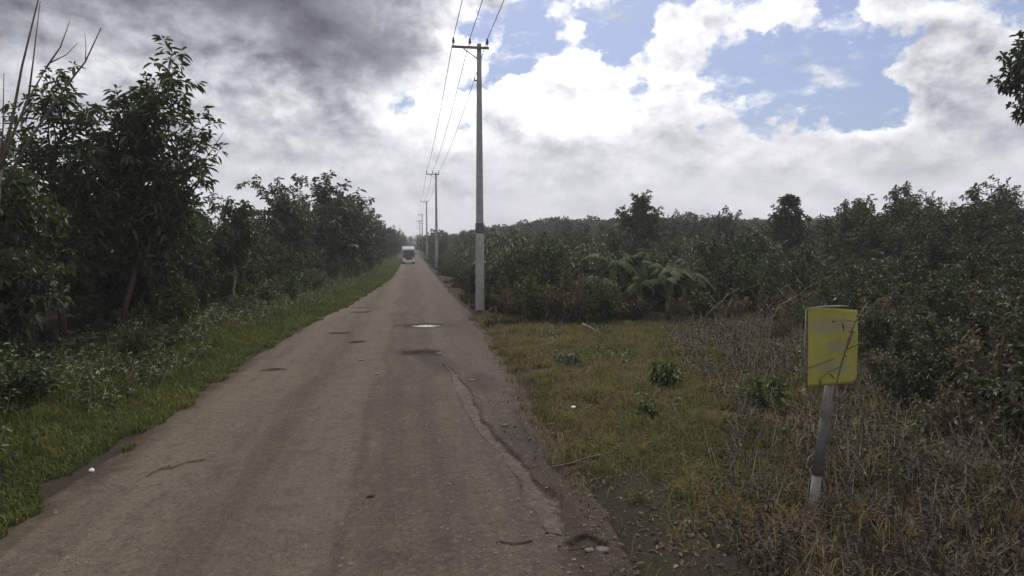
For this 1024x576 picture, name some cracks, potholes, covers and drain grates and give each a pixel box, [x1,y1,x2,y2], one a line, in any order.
crack [146,459,205,477]
pothole [562,532,611,551]
